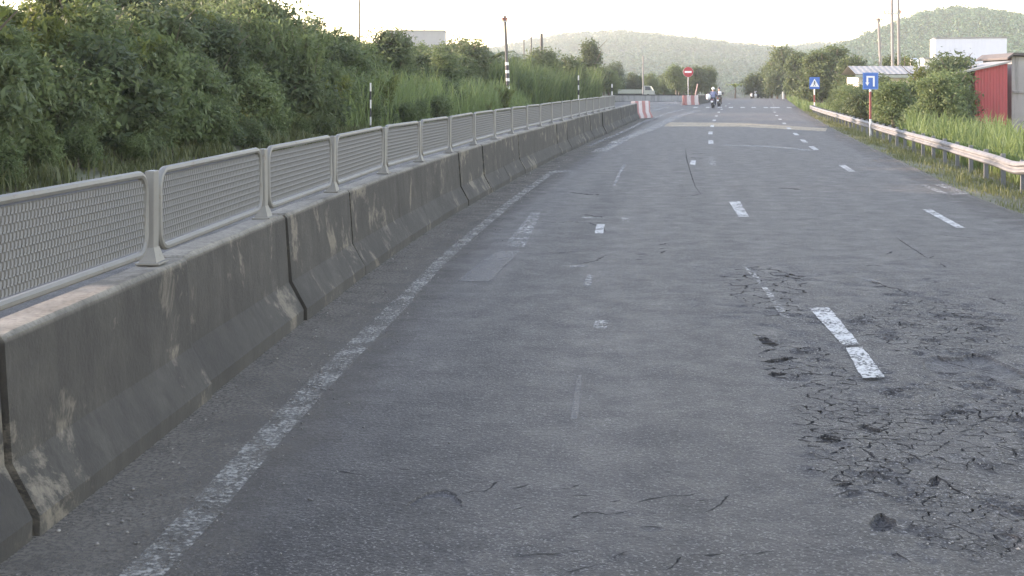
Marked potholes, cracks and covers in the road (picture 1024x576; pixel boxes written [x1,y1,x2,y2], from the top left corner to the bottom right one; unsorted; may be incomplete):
crack [756,234,1024,561]
pothole [868,513,897,532]
crack [462,481,772,570]
crack [724,266,807,317]
